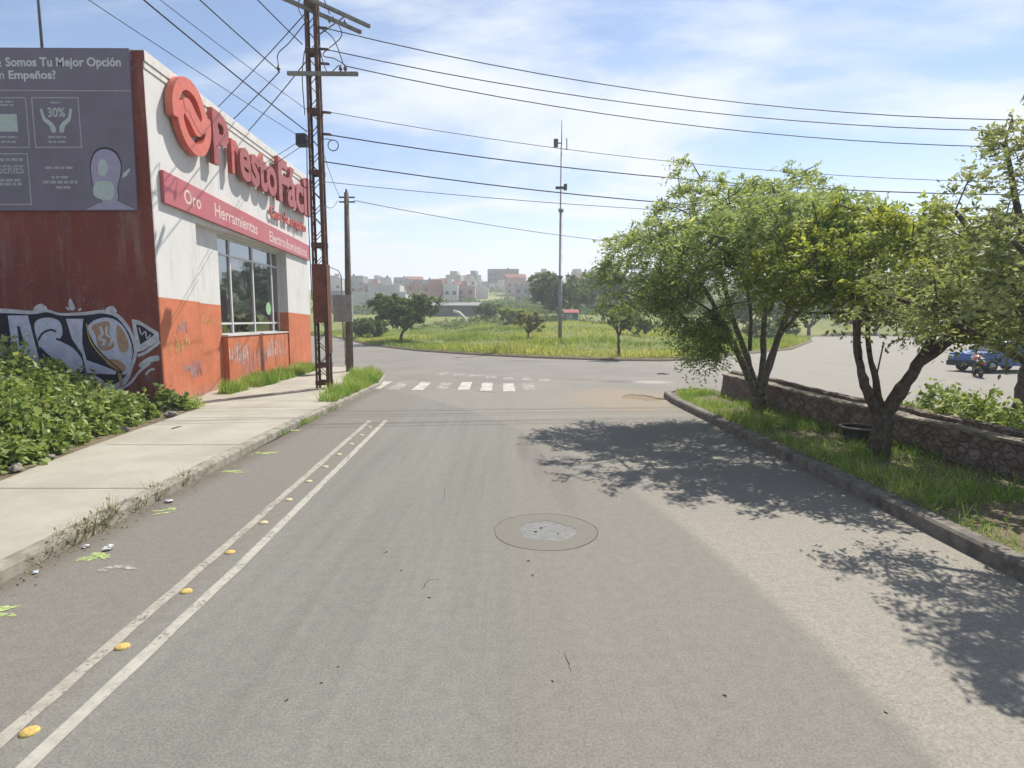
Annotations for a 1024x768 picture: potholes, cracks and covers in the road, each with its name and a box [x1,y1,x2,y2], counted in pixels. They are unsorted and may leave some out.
manhole cover [494,513,598,551]
